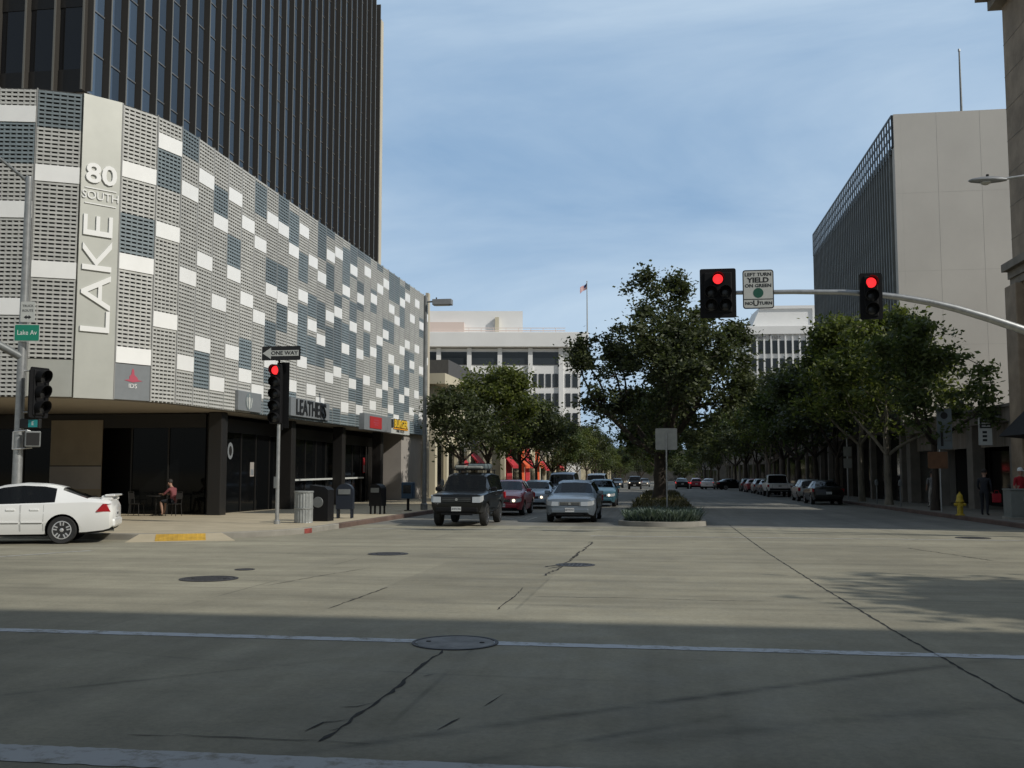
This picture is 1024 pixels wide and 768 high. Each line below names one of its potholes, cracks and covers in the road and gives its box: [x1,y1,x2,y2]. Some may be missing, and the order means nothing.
crack [465,542,592,576]
crack [127,650,459,744]
crack [497,587,734,610]
manhole cover [412,635,499,650]
